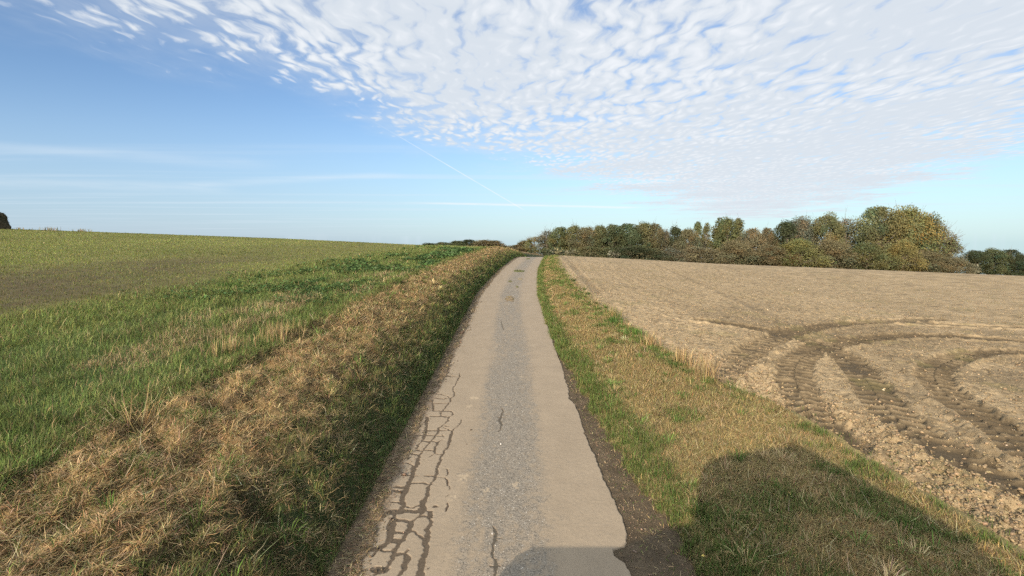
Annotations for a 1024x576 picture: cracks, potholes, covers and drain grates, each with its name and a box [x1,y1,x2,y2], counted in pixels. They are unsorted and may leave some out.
crack [489,527,502,576]
